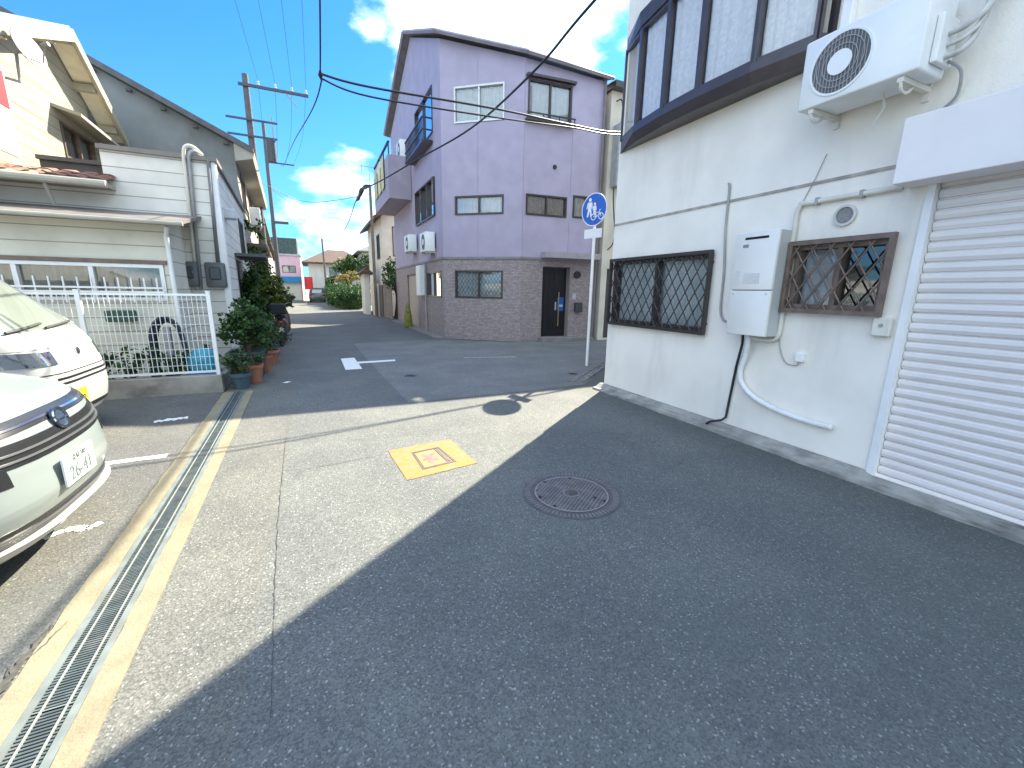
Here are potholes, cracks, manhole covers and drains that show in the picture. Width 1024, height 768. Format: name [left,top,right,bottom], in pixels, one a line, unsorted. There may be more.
manhole cover [523,472,621,520]
